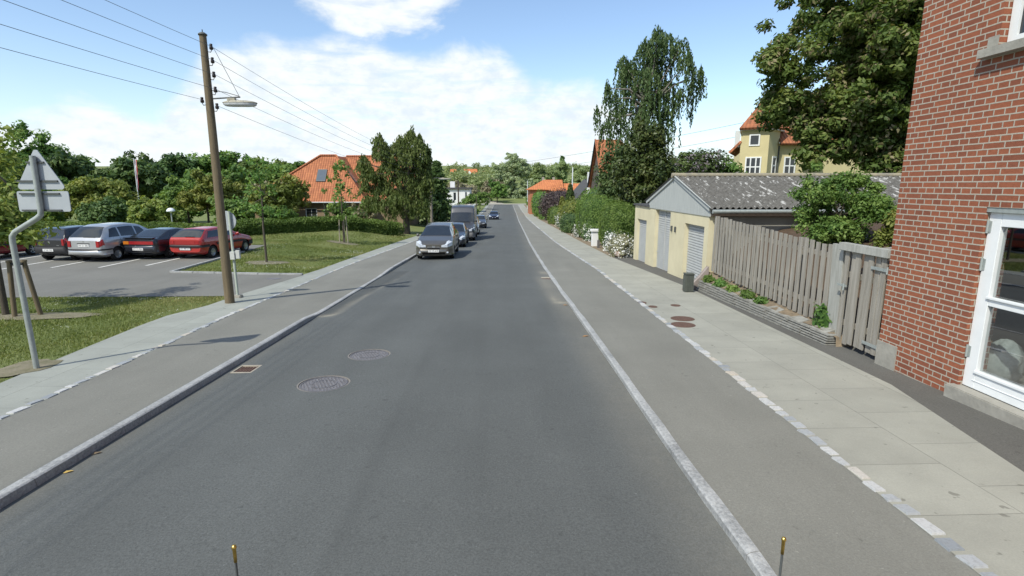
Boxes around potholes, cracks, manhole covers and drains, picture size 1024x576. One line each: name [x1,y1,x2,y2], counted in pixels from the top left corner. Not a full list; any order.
drain grate [230,365,262,373]
manhole cover [348,349,391,360]
manhole cover [296,375,350,392]
